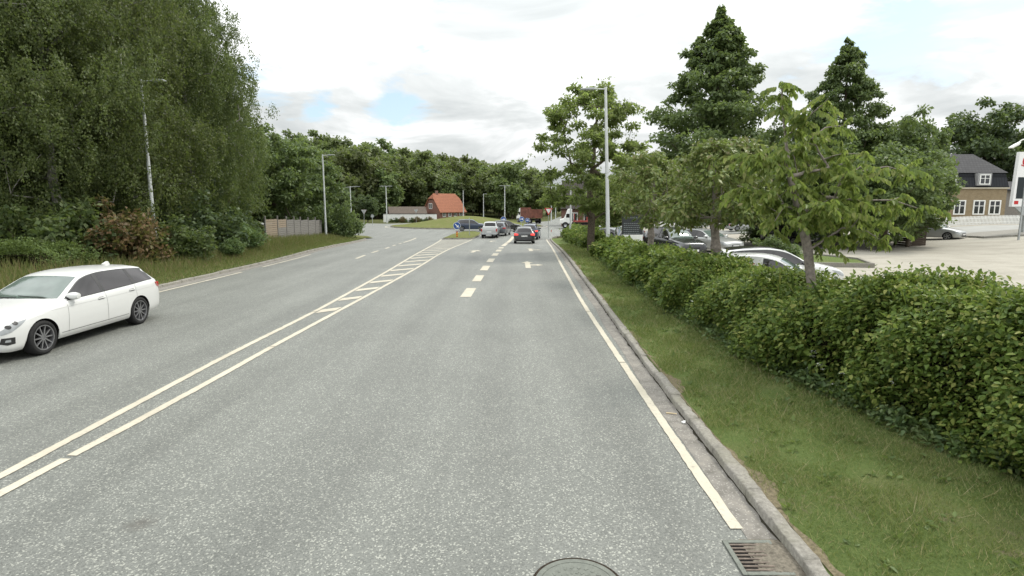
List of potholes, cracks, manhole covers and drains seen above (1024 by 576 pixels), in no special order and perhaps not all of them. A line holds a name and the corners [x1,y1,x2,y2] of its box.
drain grate [722,539,807,576]
manhole cover [533,558,619,576]
